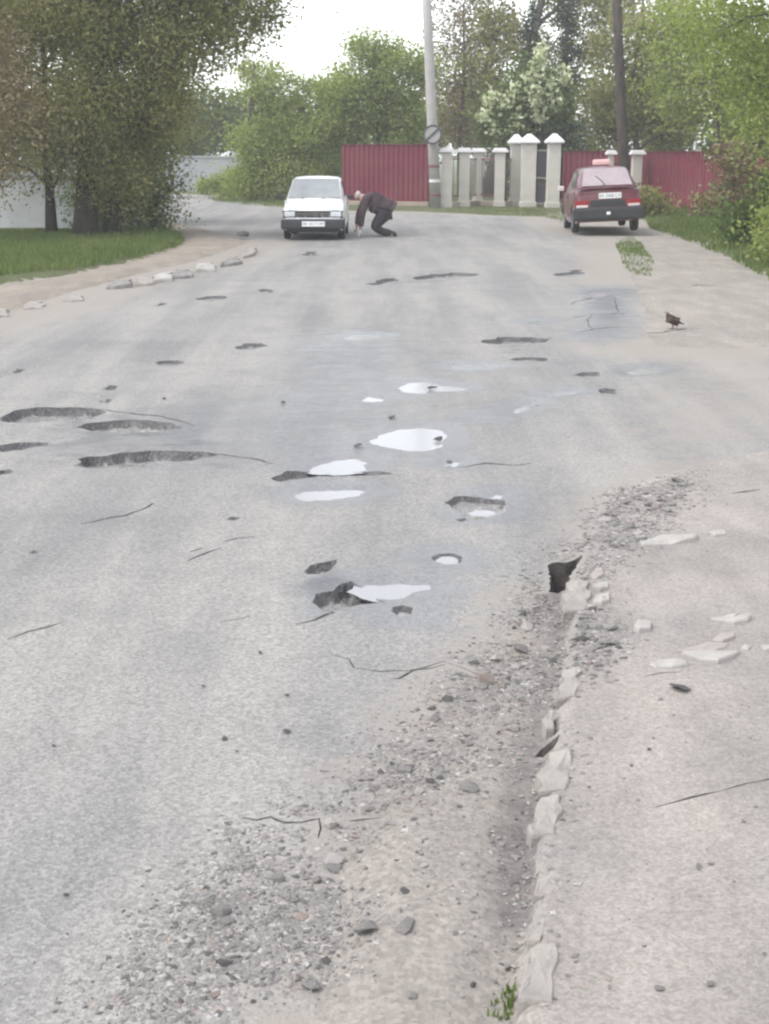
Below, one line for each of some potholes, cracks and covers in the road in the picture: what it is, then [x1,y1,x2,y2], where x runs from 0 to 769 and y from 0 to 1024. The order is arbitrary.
pothole [302,559,337,574]
pothole [444,496,506,519]
pothole [481,337,549,345]
pothole [0,442,50,452]
pothole [73,420,189,434]
pothole [271,471,392,482]
crack [656,778,769,807]
pothole [73,450,219,469]
pothole [547,555,582,594]
crack [335,655,476,679]
crack [243,816,322,838]
pothole [431,553,462,564]
